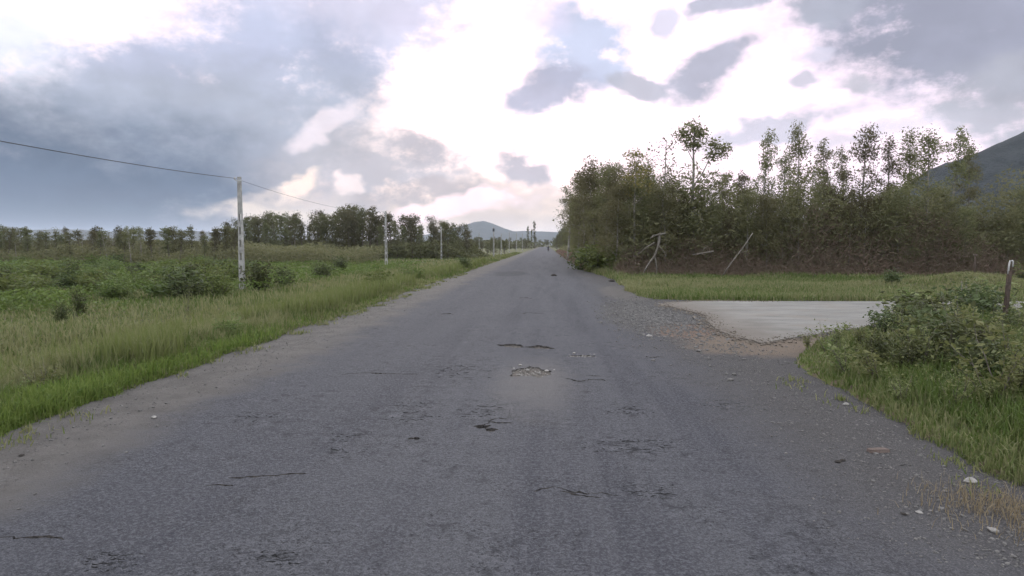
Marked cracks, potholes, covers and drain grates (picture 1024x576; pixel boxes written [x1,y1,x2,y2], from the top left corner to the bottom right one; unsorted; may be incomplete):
crack [201,473,306,487]
crack [535,485,676,499]
crack [0,535,142,572]
pothole [510,366,552,378]
